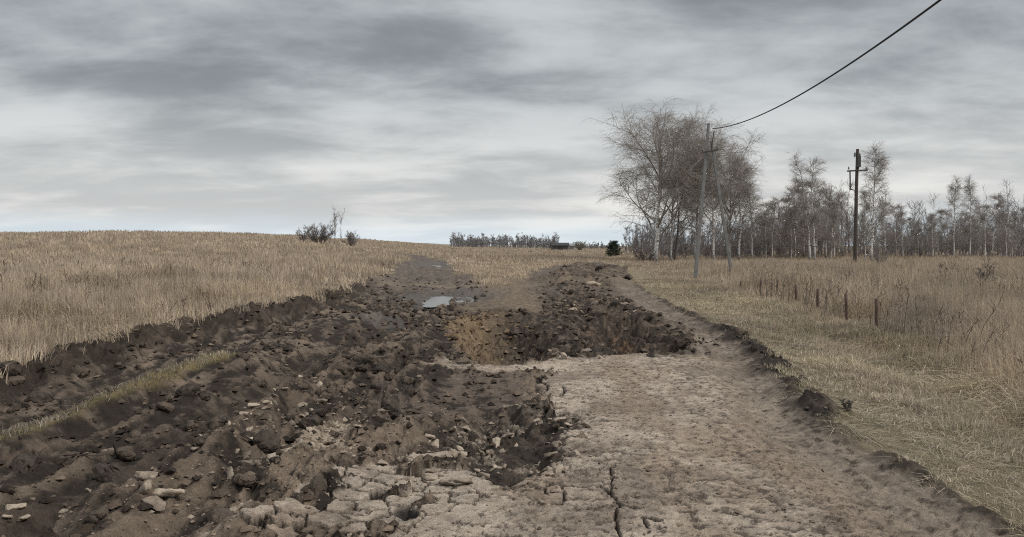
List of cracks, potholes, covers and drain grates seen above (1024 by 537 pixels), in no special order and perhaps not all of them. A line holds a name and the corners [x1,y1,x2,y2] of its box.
pothole [438,394,590,493]
crack [222,456,490,537]
pothole [439,309,568,366]
crack [524,462,664,537]
pothole [571,309,699,355]
